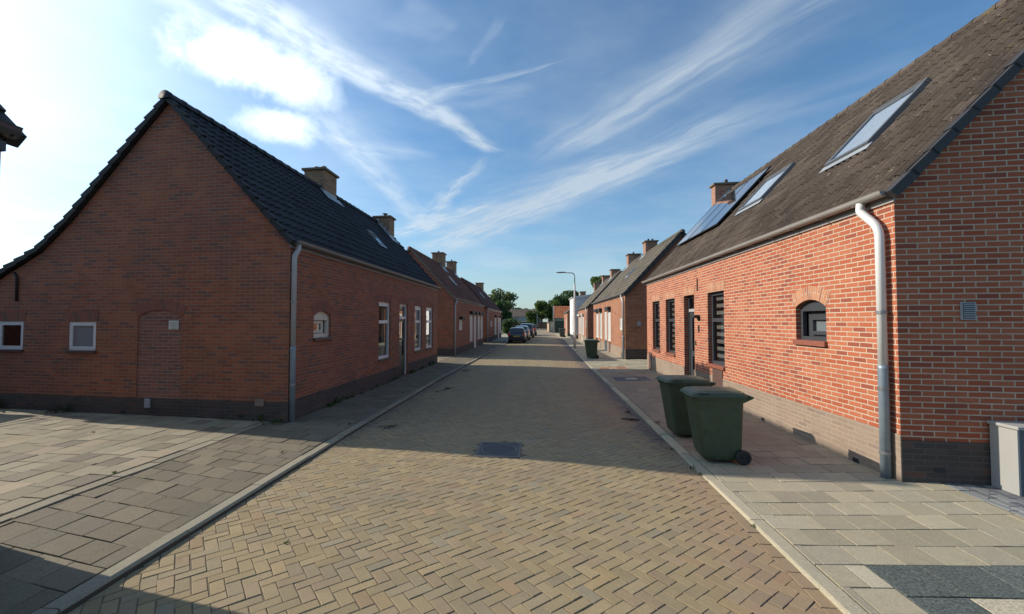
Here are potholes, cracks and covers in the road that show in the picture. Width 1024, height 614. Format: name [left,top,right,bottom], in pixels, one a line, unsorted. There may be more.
manhole cover [474,442,522,458]
